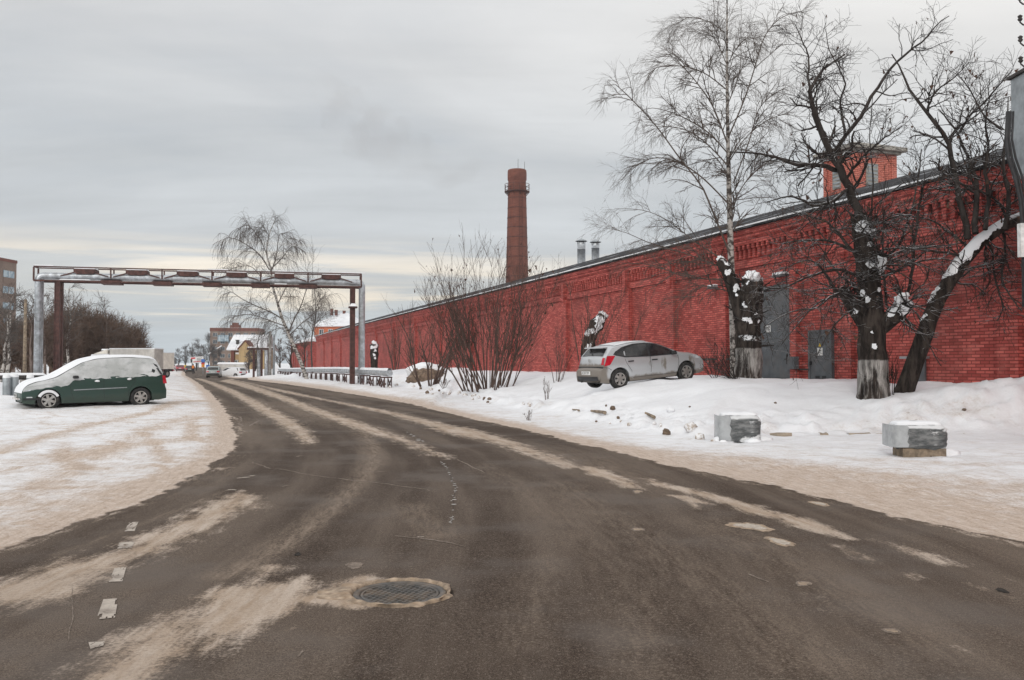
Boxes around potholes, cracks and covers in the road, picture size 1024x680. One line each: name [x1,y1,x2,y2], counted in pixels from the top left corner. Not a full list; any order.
crack [440,461,485,517]
manhole cover [317,577,453,608]
